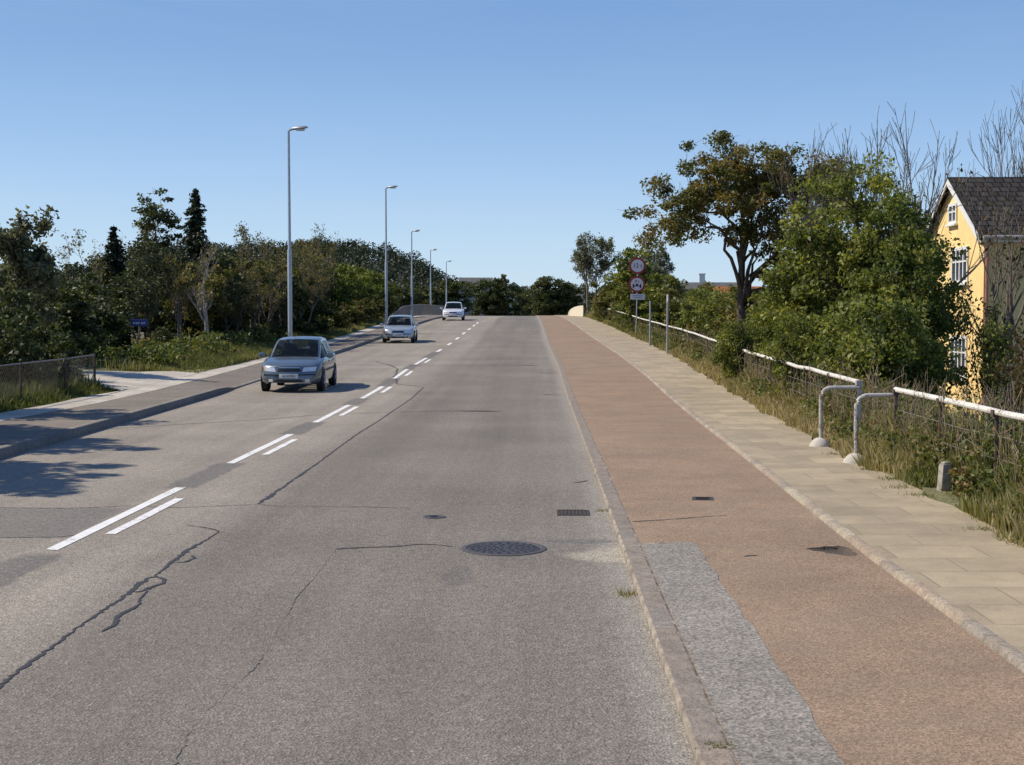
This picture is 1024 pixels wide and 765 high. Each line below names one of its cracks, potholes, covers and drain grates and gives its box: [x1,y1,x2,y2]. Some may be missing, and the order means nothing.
crack [6,361,489,508]
crack [0,525,219,688]
manhole cover [461,541,547,556]
crack [173,544,448,765]
pothole [806,546,857,556]
